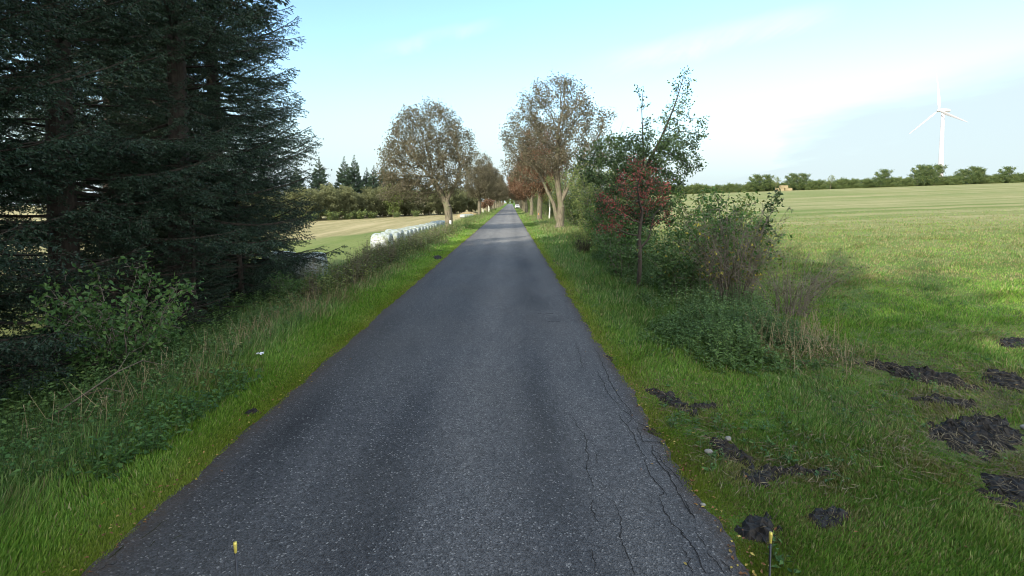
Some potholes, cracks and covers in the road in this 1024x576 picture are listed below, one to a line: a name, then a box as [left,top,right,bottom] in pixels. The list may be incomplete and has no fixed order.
crack [577,348,731,573]
